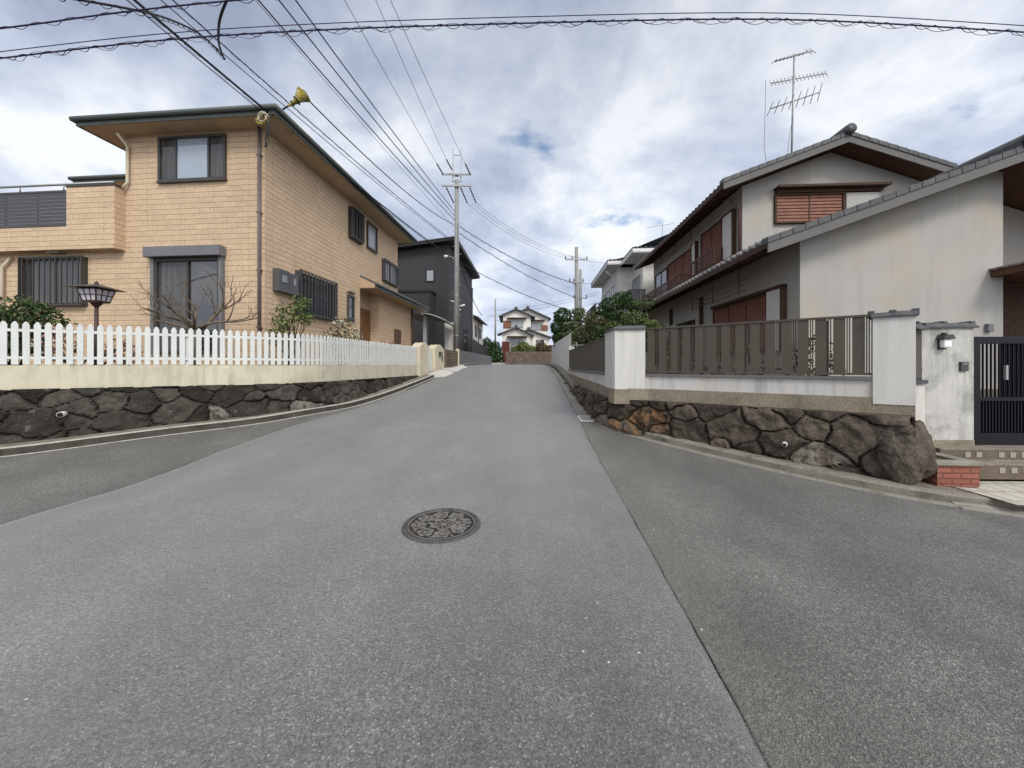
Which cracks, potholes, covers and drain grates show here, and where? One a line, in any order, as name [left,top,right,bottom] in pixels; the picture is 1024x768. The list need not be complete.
manhole cover [401,508,481,544]
